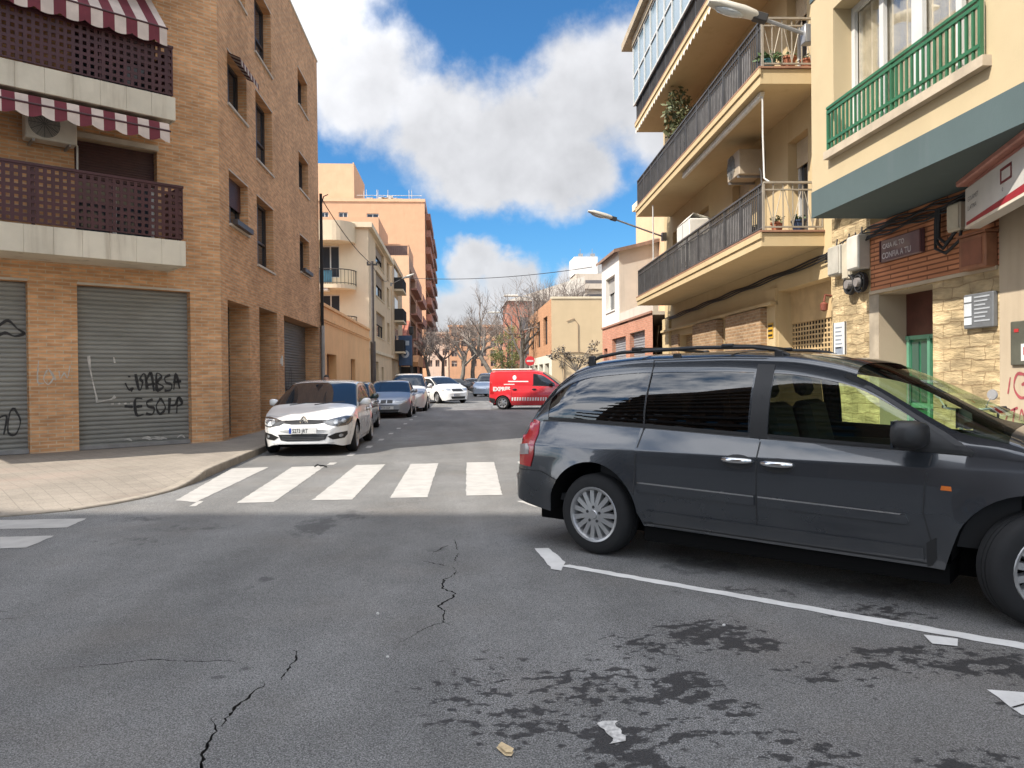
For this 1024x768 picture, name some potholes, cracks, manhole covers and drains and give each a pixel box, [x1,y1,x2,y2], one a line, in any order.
crack [63,659,234,668]
crack [200,650,298,768]
crack [399,540,458,643]
